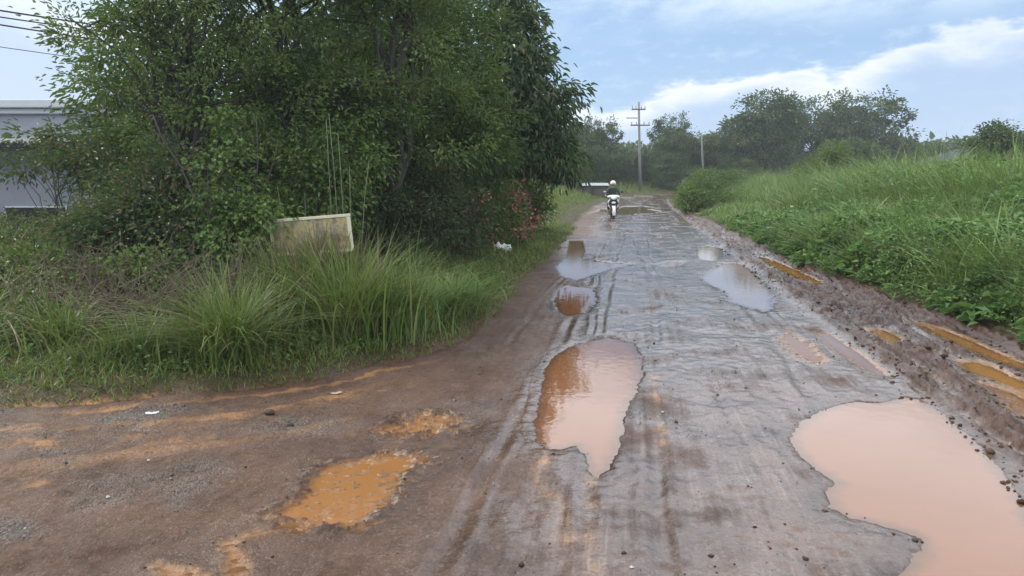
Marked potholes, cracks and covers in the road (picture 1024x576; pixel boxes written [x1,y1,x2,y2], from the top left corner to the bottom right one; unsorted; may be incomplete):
pothole [243,445,446,542]
pothole [547,284,604,317]
pothole [551,240,637,281]
pothole [694,262,782,313]
pothole [587,206,665,216]
pothole [692,245,728,261]
pothole [359,406,479,443]
pothole [768,329,838,369]
pothole [774,392,1024,576]
pothole [519,334,654,486]
